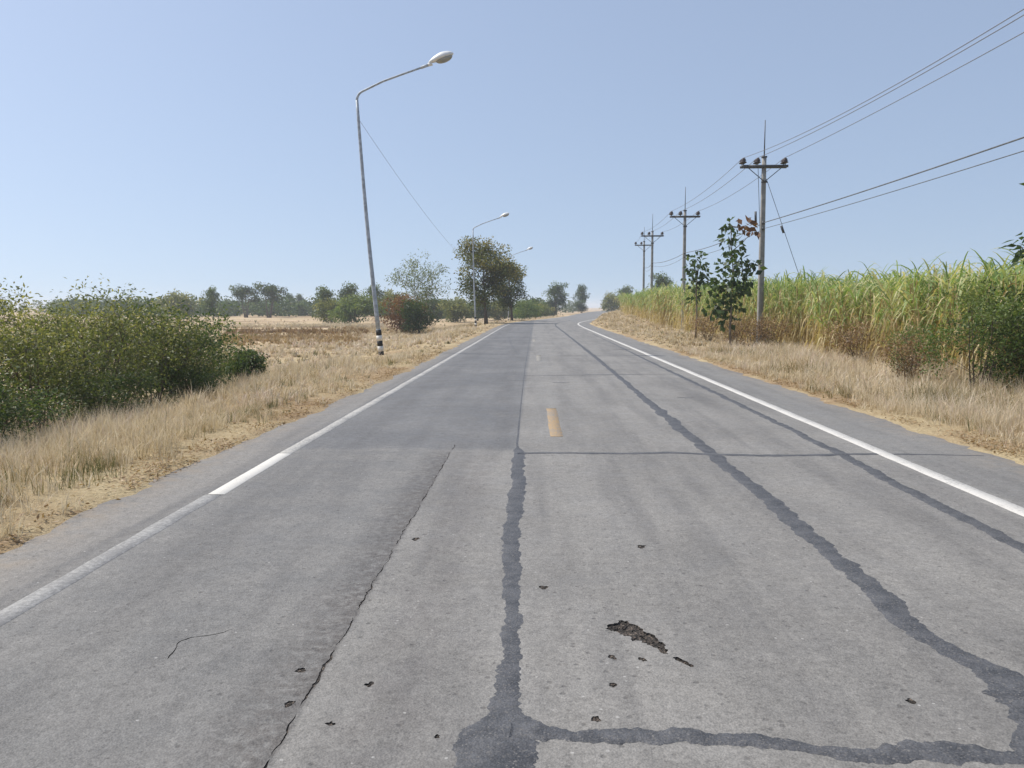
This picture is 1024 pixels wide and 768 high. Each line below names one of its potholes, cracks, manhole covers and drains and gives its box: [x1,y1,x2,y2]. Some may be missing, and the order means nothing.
pothole [605,620,693,667]
